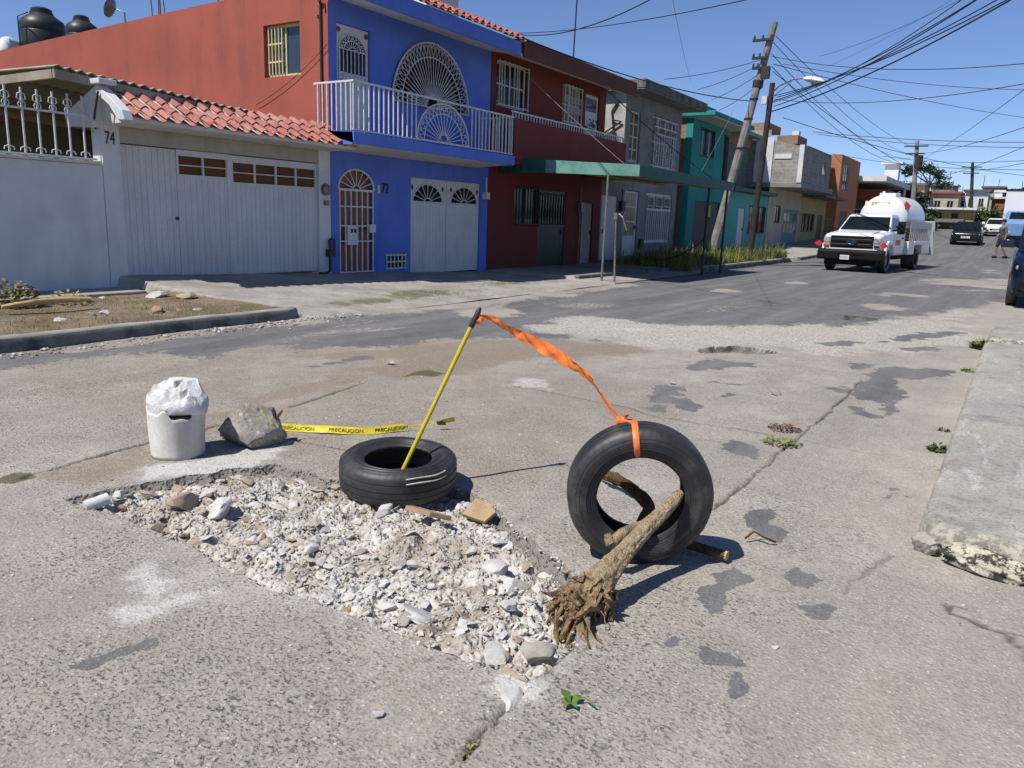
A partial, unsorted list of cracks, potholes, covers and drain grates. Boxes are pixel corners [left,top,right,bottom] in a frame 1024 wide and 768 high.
crack [285,434,349,452]
crack [507,378,892,514]
pothole [698,345,779,356]
crack [834,551,905,599]
pothole [64,463,580,683]
crack [444,679,540,768]
crack [281,381,371,409]
crack [934,598,1024,665]
